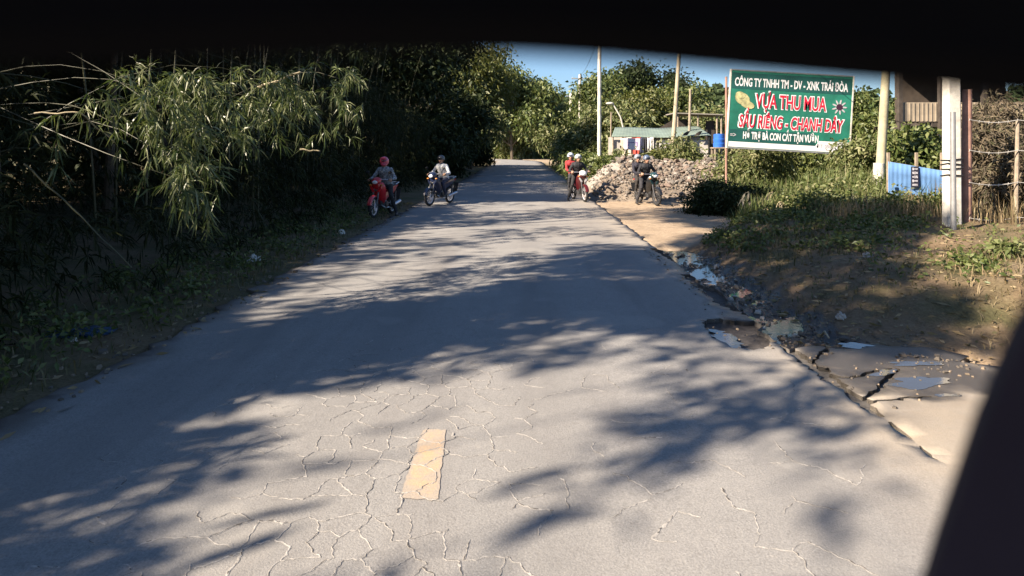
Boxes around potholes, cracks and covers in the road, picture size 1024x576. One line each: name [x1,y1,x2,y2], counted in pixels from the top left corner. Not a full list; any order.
pothole [702,318,775,350]
crack [30,330,935,576]
